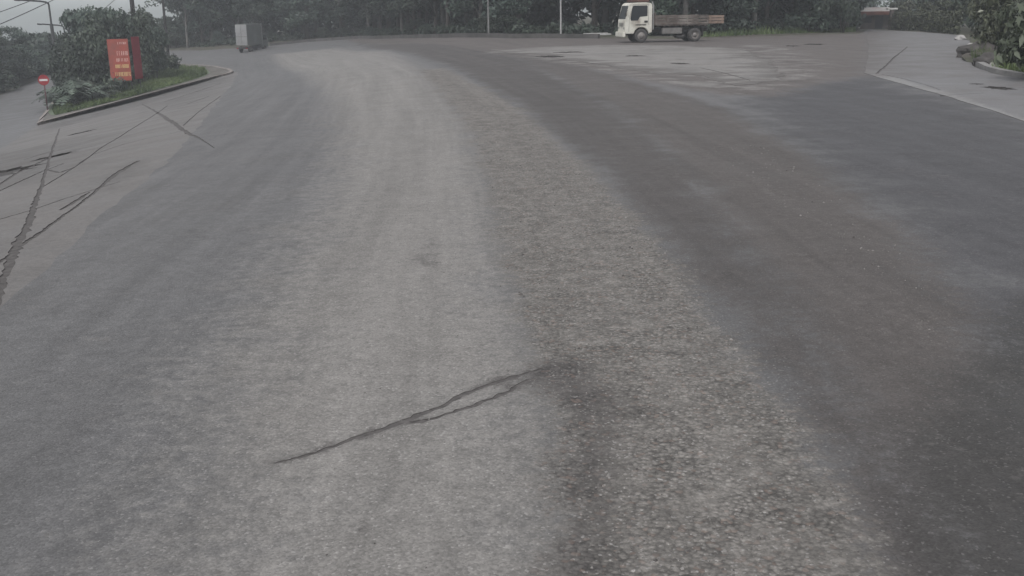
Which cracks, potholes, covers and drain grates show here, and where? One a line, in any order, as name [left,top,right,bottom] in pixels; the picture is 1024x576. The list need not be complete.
crack [275,368,543,463]
crack [0,86,221,305]
